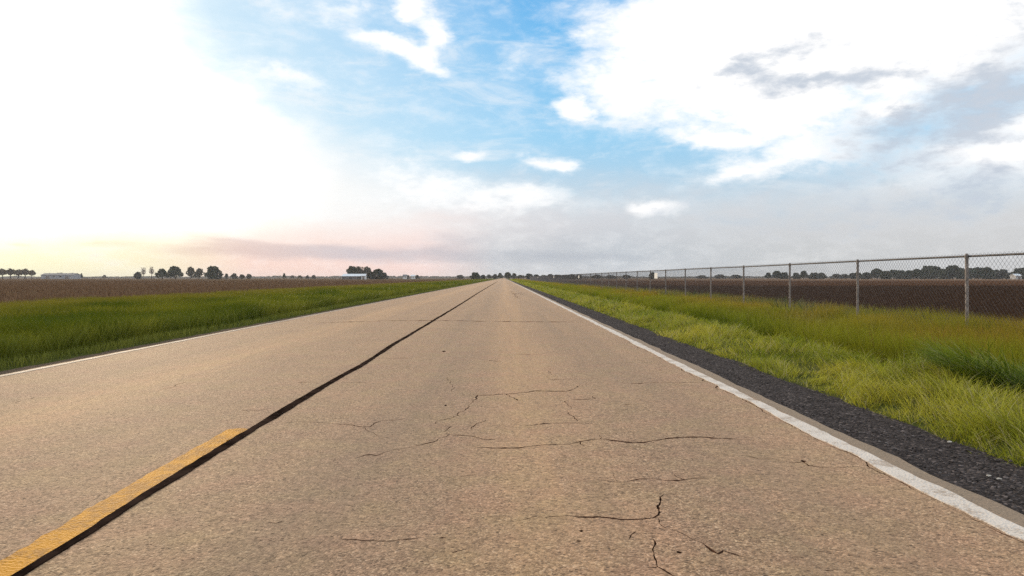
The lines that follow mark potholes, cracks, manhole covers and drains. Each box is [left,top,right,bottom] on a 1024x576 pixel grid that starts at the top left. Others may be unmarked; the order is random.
crack [344,537,466,553]
crack [286,341,1024,543]
crack [517,474,752,576]
